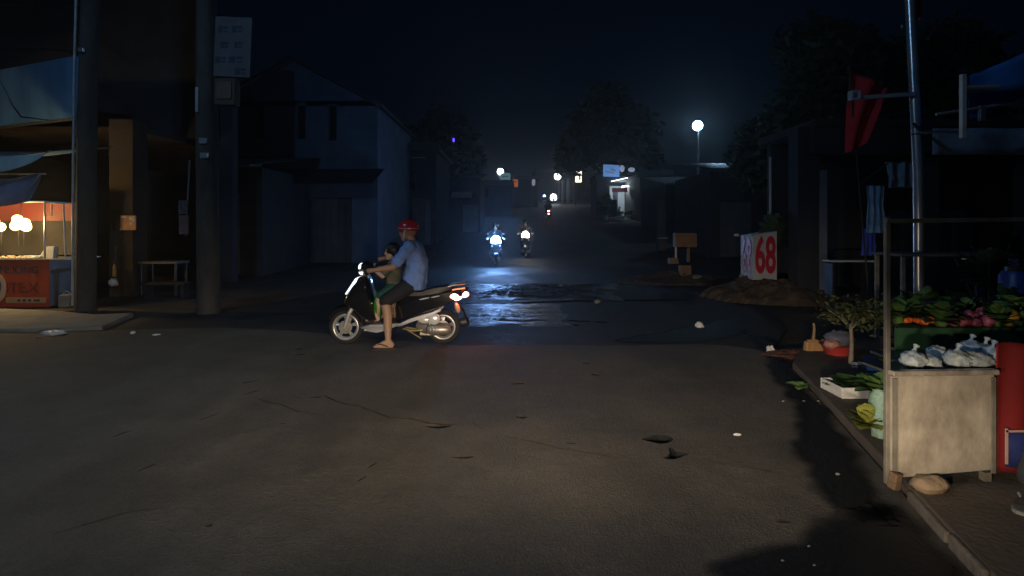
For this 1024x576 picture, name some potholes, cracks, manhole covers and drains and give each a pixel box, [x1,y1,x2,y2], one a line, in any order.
pothole [663,447,690,459]
pothole [642,435,673,444]
crack [505,436,612,457]
crack [257,395,481,428]
crack [54,507,170,534]
